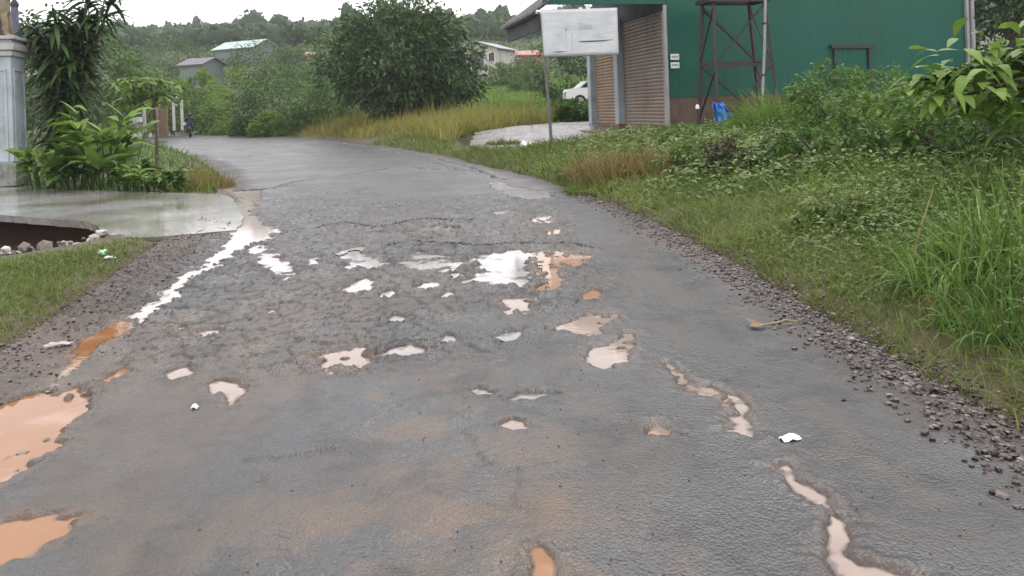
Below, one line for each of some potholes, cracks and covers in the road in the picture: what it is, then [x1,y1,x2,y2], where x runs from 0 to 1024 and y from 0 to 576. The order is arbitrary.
pothole [297,338,388,379]
pothole [0,379,111,488]
pothole [538,306,631,341]
pothole [241,240,308,282]
pothole [635,414,685,439]
pothole [520,247,598,292]
pothole [458,247,544,289]
pothole [747,452,942,576]
pothole [483,414,541,433]
pothole [195,375,260,411]
pothole [328,250,400,270]
pothole [513,531,571,576]
